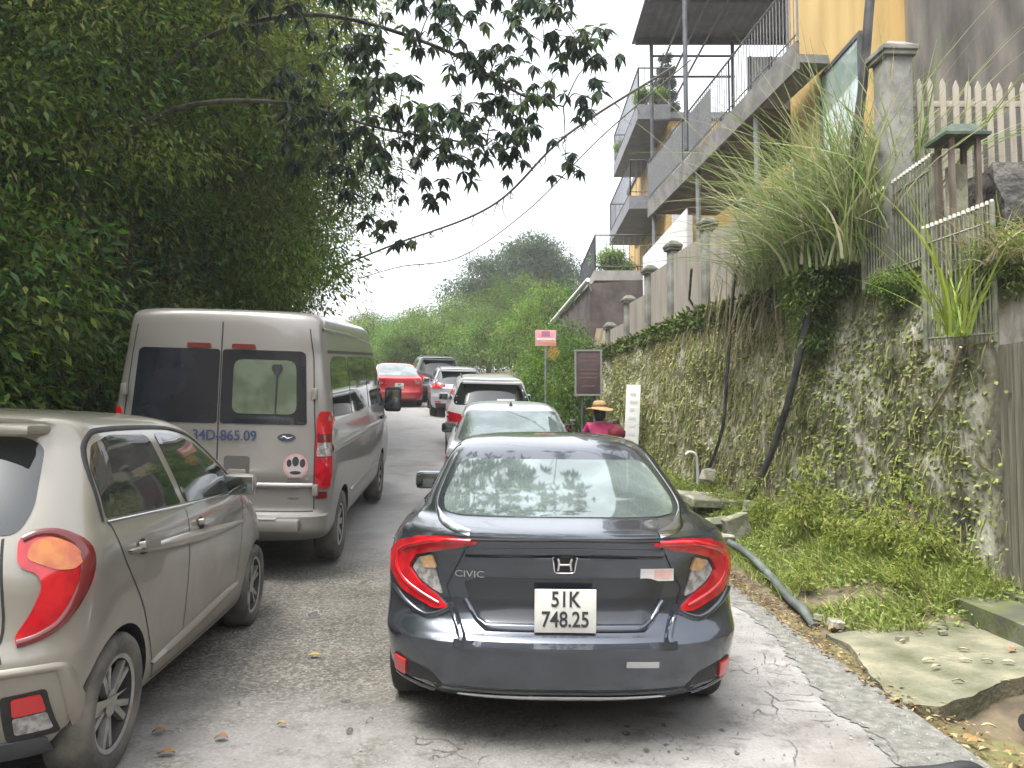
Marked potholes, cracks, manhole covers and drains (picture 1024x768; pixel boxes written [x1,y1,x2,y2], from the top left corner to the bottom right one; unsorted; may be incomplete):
crack [730,642,836,721]
crack [410,715,493,765]
